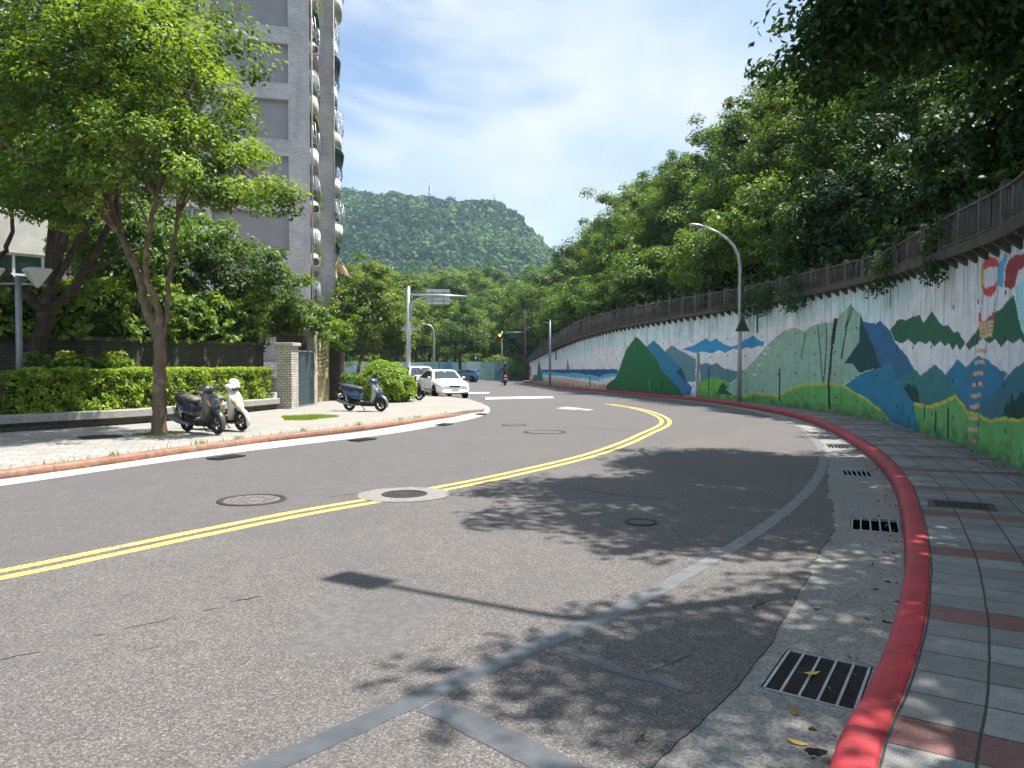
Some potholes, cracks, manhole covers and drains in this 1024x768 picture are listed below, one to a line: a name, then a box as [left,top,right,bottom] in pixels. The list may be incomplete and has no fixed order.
drain grate [762,649,873,711]
crack [0,596,259,660]
drain grate [841,469,874,477]
manhole cover [358,487,451,502]
manhole cover [625,518,657,526]
manhole cover [216,494,287,506]
drain grate [850,517,901,533]
